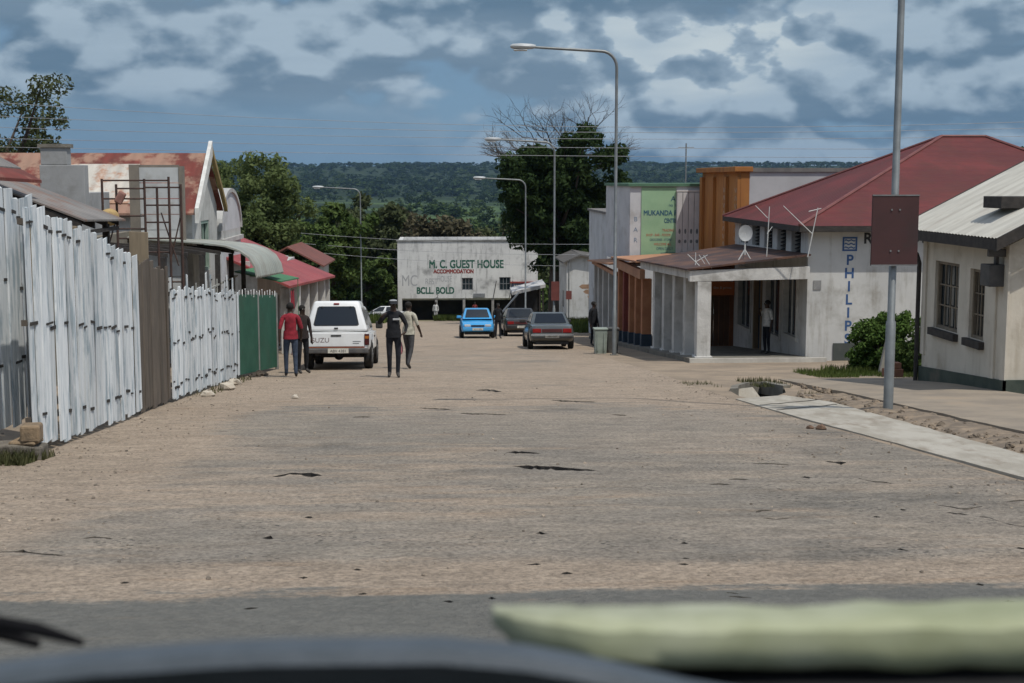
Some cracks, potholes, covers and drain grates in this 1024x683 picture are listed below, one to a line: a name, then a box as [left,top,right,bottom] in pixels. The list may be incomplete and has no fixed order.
crack [940,500,1024,527]
